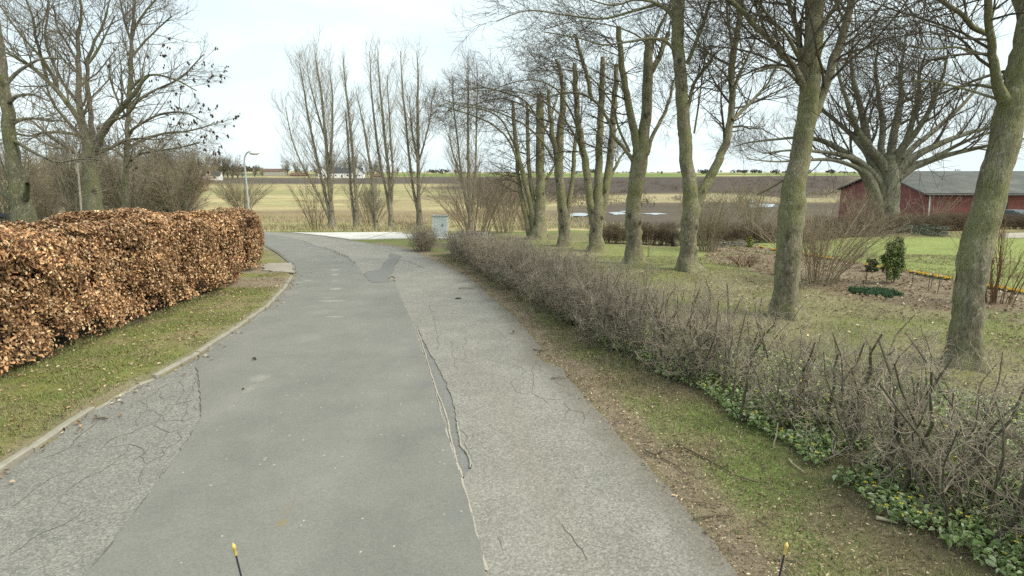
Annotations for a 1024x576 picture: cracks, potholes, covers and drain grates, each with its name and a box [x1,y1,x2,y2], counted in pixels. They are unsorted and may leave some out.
crack [513,362,585,425]
crack [93,369,201,565]
crack [11,425,115,553]
